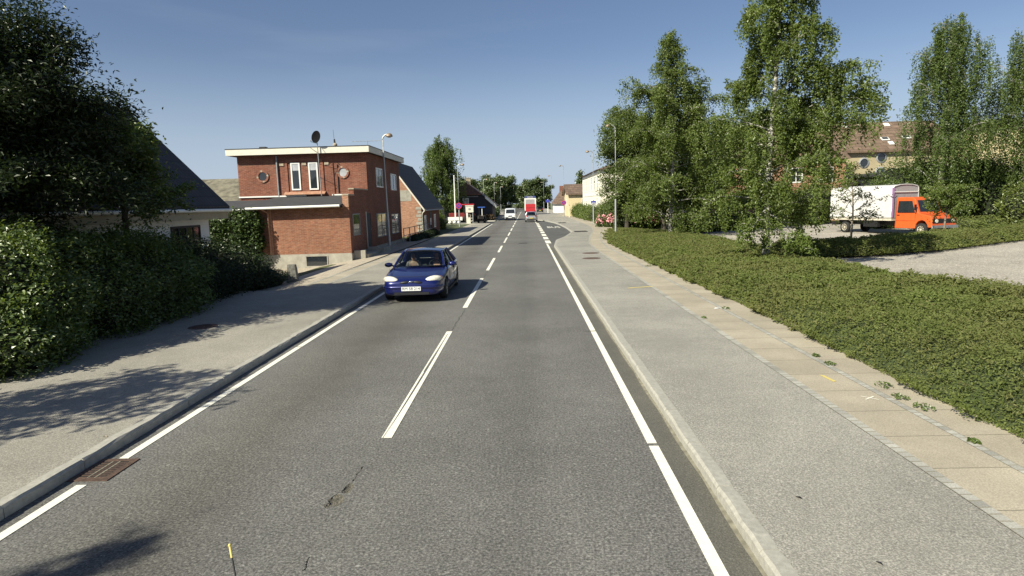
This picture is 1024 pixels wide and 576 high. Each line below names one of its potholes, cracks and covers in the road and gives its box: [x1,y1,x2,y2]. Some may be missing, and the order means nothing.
drain grate [67,458,140,482]
